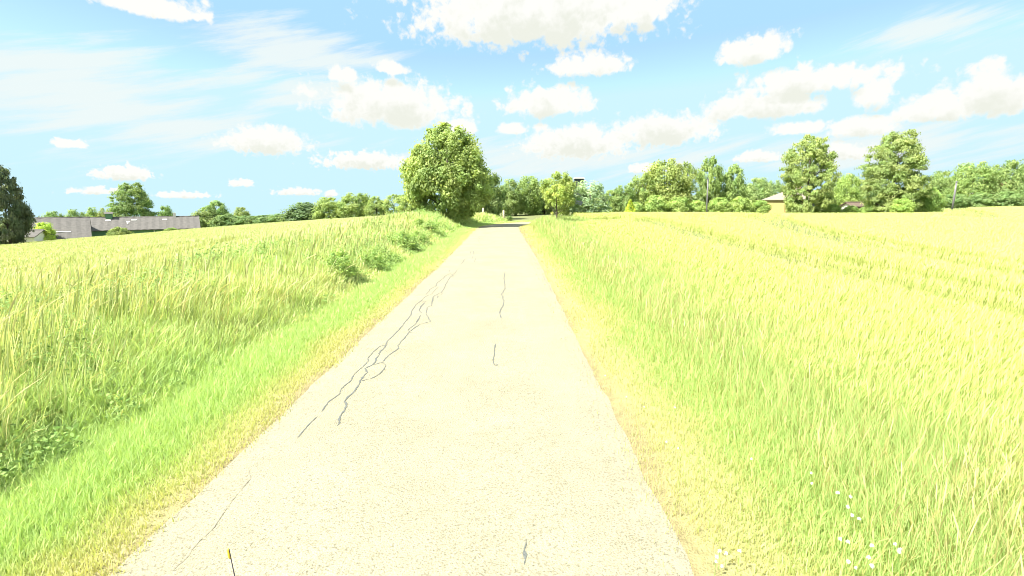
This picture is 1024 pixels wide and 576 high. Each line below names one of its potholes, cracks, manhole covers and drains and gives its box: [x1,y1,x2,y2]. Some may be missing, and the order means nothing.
crack [174,463,256,569]
crack [297,267,456,438]
